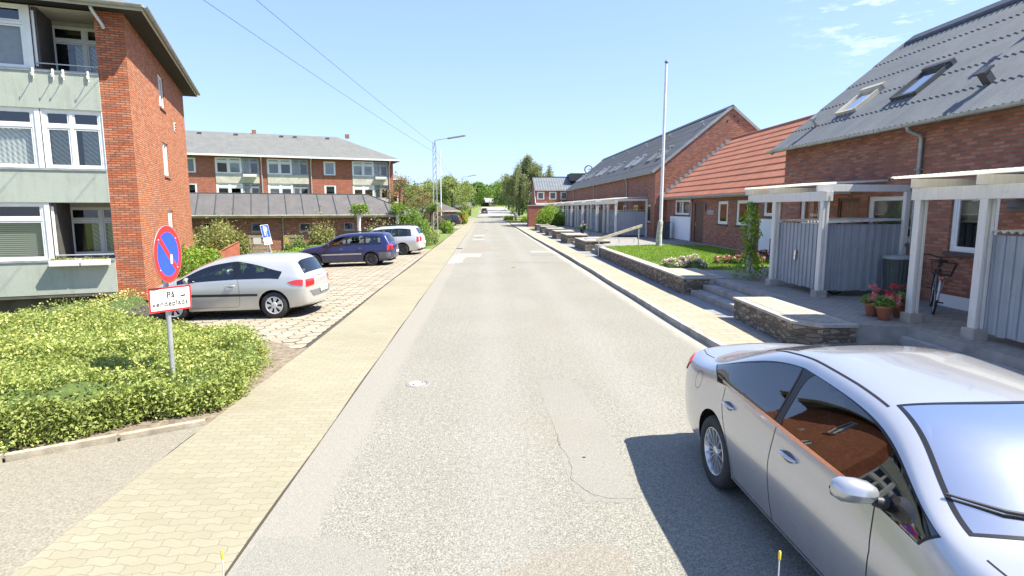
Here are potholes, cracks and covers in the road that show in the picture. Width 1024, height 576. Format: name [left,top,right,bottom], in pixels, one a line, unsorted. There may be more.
manhole cover [405,380,430,388]
